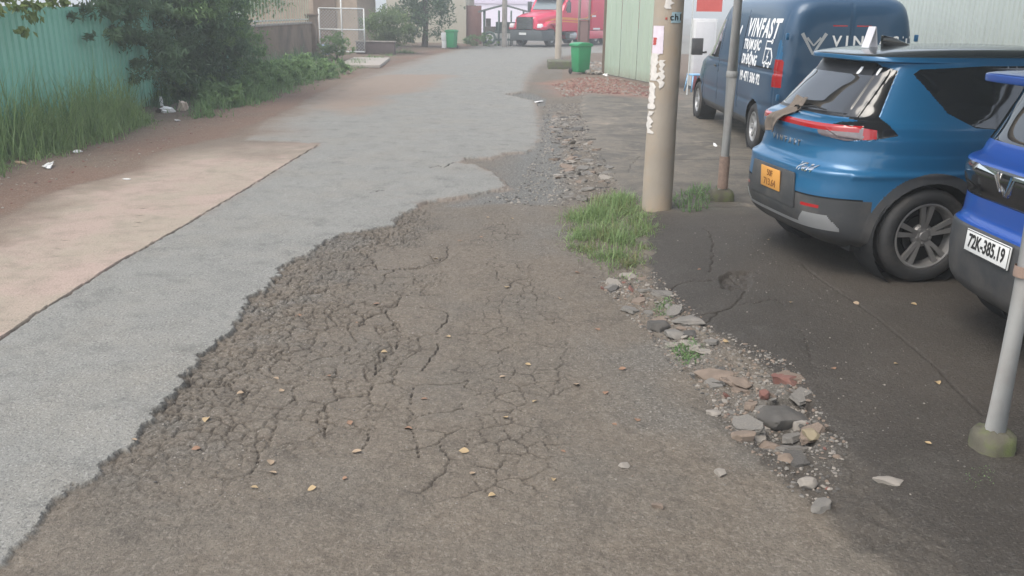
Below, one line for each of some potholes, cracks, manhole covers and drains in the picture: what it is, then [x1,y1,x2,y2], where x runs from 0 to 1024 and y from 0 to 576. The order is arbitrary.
crack [29,162,583,556]
crack [653,229,785,328]
pothole [717,270,755,291]
